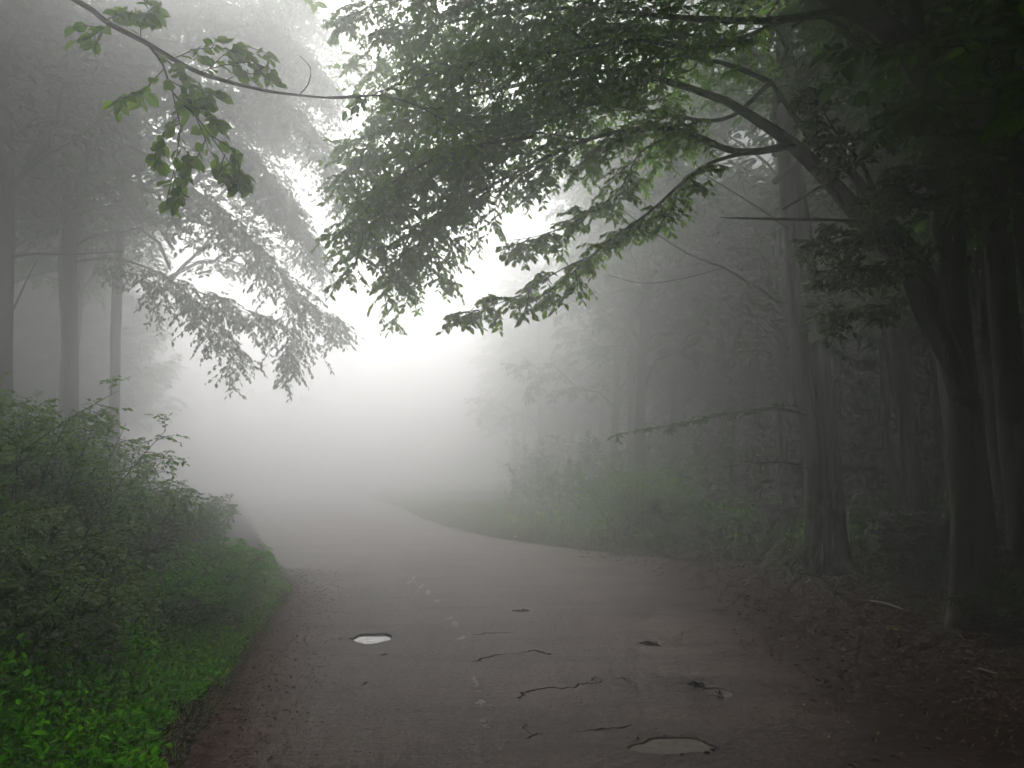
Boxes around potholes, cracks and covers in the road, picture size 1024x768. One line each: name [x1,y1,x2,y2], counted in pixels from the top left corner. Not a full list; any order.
crack [577,724,631,732]
pothole [627,734,720,755]
pothole [349,633,392,644]
crack [471,650,551,662]
crack [517,676,626,699]
pothole [702,687,733,698]
